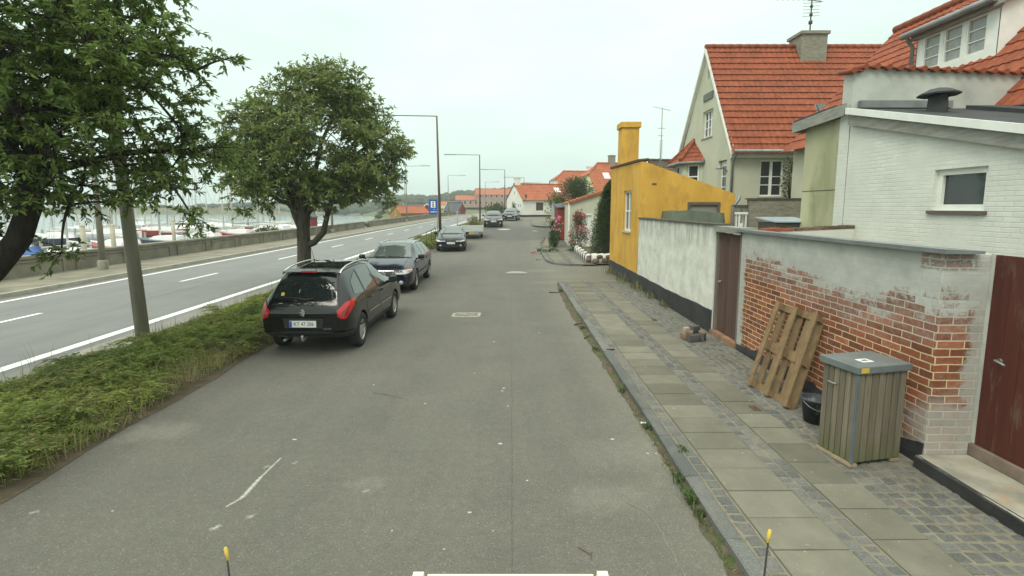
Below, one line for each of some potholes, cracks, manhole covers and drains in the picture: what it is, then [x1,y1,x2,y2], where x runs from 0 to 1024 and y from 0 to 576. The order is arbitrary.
crack [592,464,686,576]
